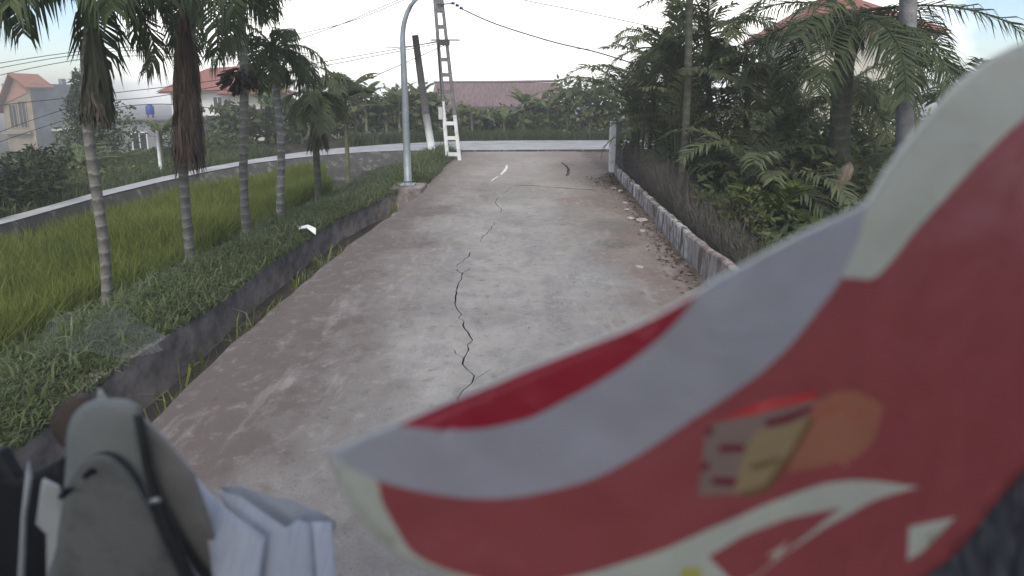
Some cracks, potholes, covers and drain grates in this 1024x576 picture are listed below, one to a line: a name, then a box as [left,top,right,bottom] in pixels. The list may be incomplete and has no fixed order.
crack [453,162,591,395]
